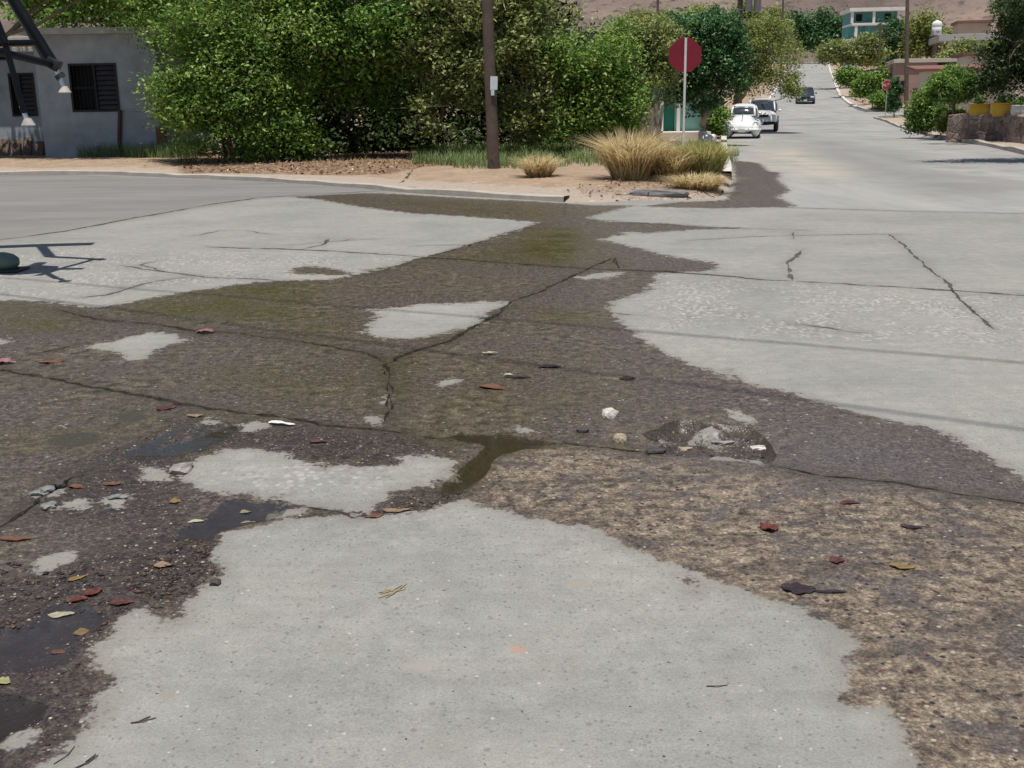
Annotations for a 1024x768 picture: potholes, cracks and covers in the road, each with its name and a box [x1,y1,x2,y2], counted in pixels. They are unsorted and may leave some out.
pothole [642,419,777,464]
crack [295,506,354,518]
crack [61,257,620,423]
crack [786,232,802,281]
crack [801,324,862,333]
crack [889,234,995,330]
